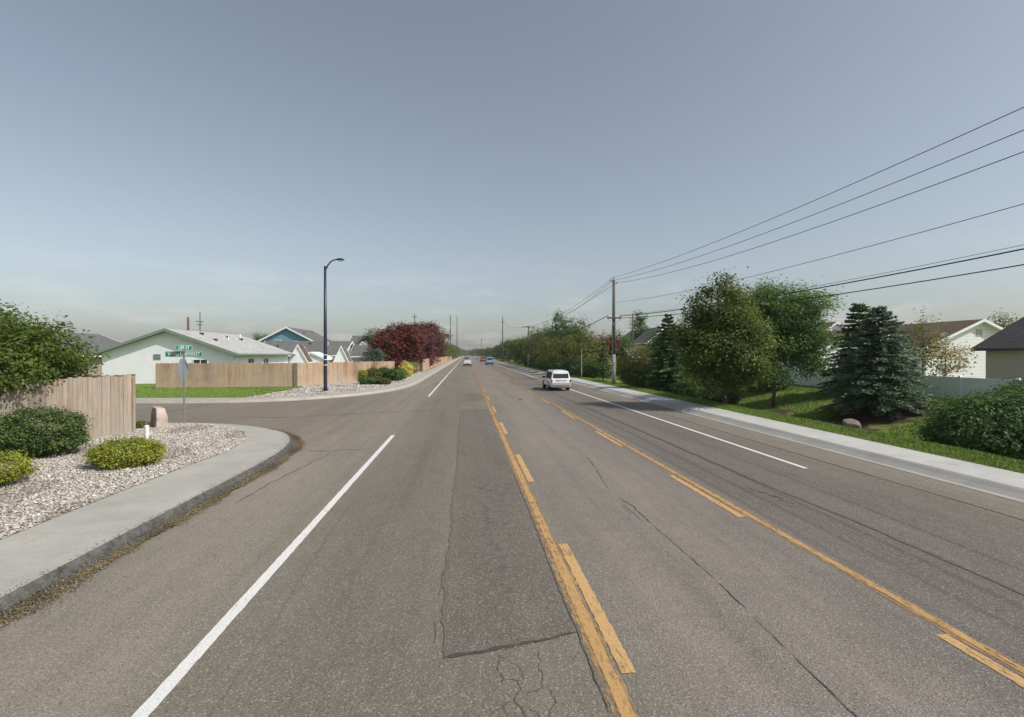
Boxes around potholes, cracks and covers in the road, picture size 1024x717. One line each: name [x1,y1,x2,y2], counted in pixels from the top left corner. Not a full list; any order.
crack [588,458,858,717]
crack [497,652,557,717]
